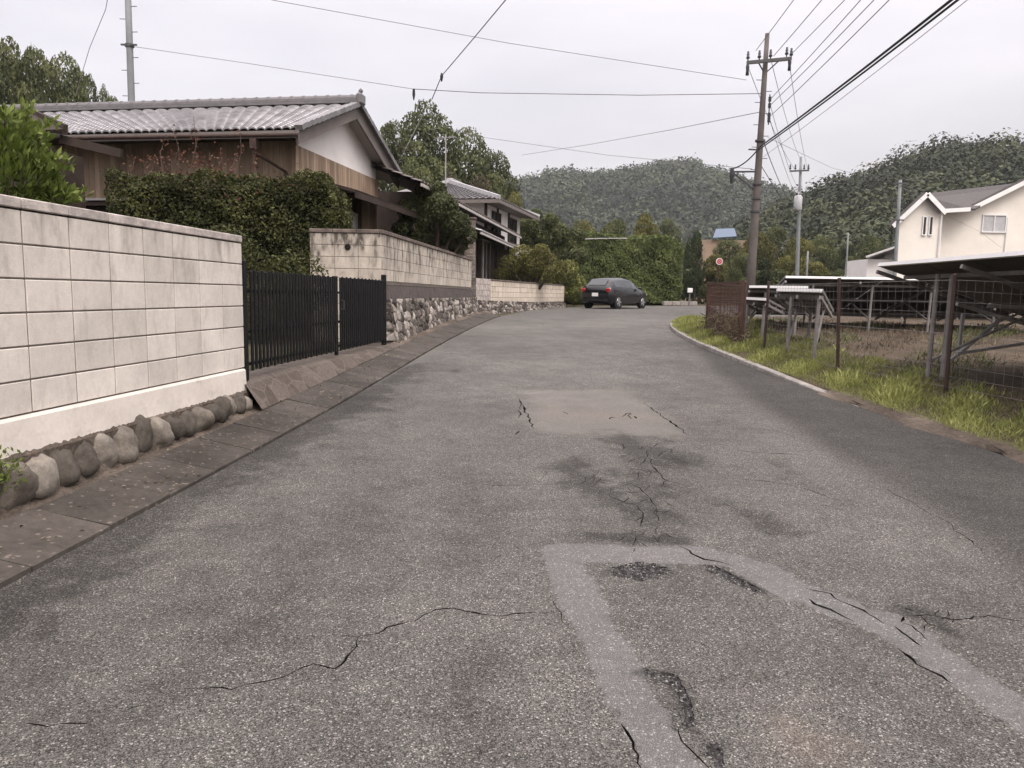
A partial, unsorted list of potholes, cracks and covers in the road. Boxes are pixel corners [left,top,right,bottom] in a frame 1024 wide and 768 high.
crack [564,403,732,566]
pothole [642,668,696,729]
pothole [609,562,669,582]
crack [621,724,641,768]
crack [806,588,1021,685]
crack [515,399,534,435]
crack [14,601,567,728]
pothole [704,565,761,592]
